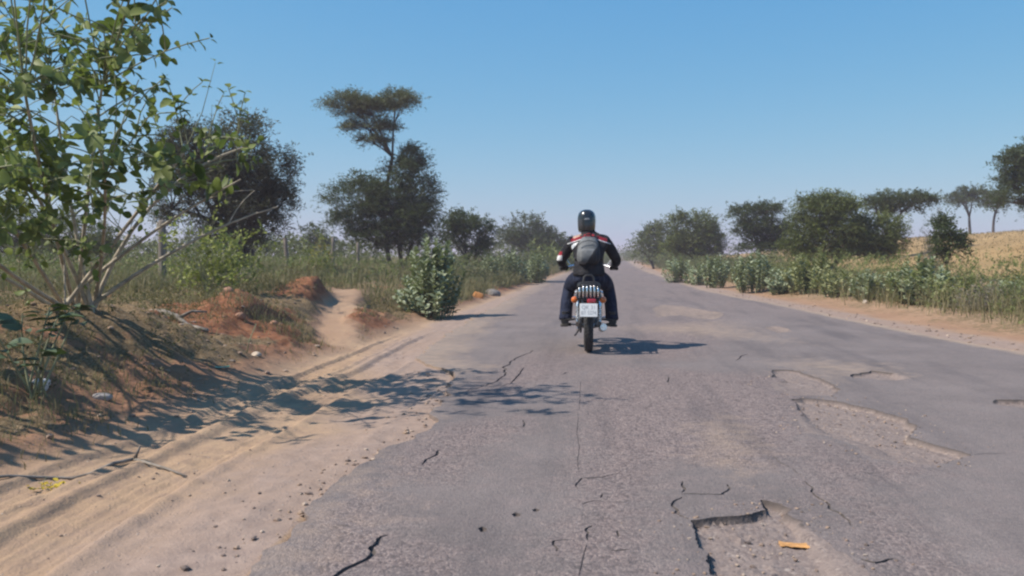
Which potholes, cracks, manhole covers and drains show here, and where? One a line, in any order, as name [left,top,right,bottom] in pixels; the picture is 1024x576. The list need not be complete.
pothole [993,399,1024,408]
pothole [850,370,912,380]
pothole [791,398,971,466]
crack [772,455,852,526]
pothole [691,500,870,576]
crack [333,535,387,576]
crack [459,350,533,394]
pothole [770,370,841,396]
crack [671,482,731,519]
